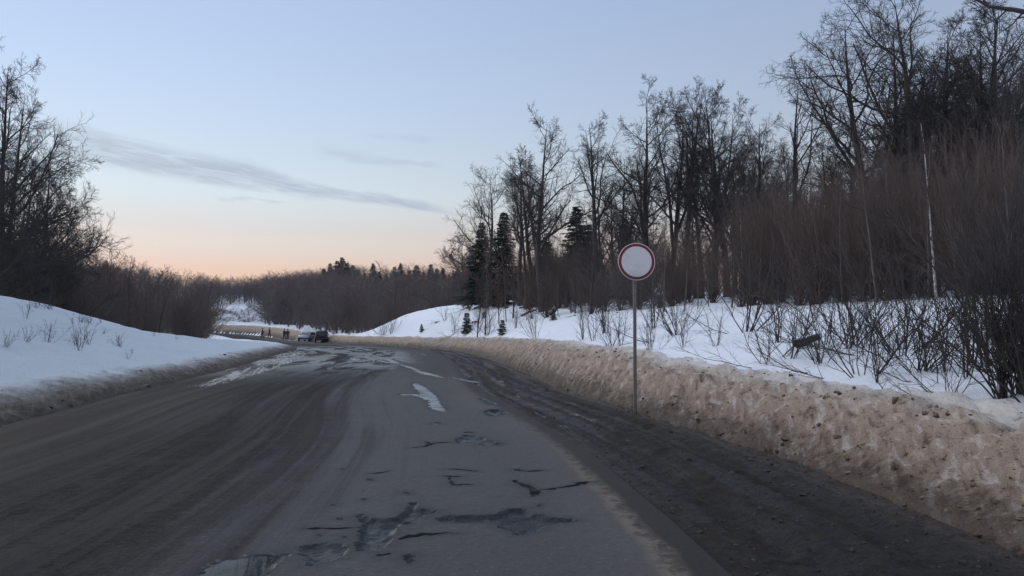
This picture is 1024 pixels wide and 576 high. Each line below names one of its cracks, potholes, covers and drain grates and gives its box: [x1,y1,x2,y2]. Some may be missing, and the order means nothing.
pothole [435,508,584,535]
pothole [196,552,292,576]
crack [446,469,478,486]
pothole [454,435,506,446]
pothole [294,542,351,567]
